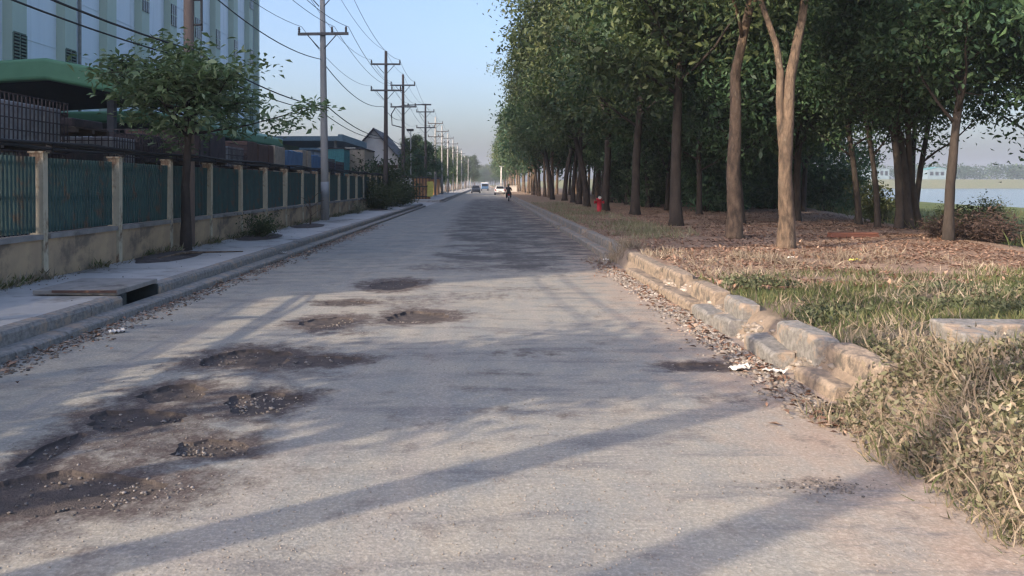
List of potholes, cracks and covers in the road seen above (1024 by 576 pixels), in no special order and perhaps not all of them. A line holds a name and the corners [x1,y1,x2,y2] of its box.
pothole [0,463,194,522]
pothole [298,317,354,329]
pothole [368,280,419,291]
pothole [385,311,449,323]
pothole [169,439,249,458]
pothole [15,433,88,467]
pothole [291,355,362,366]
pothole [223,391,304,415]
pothole [135,383,208,403]
drain grate [33,278,158,305]
pothole [86,409,187,432]
